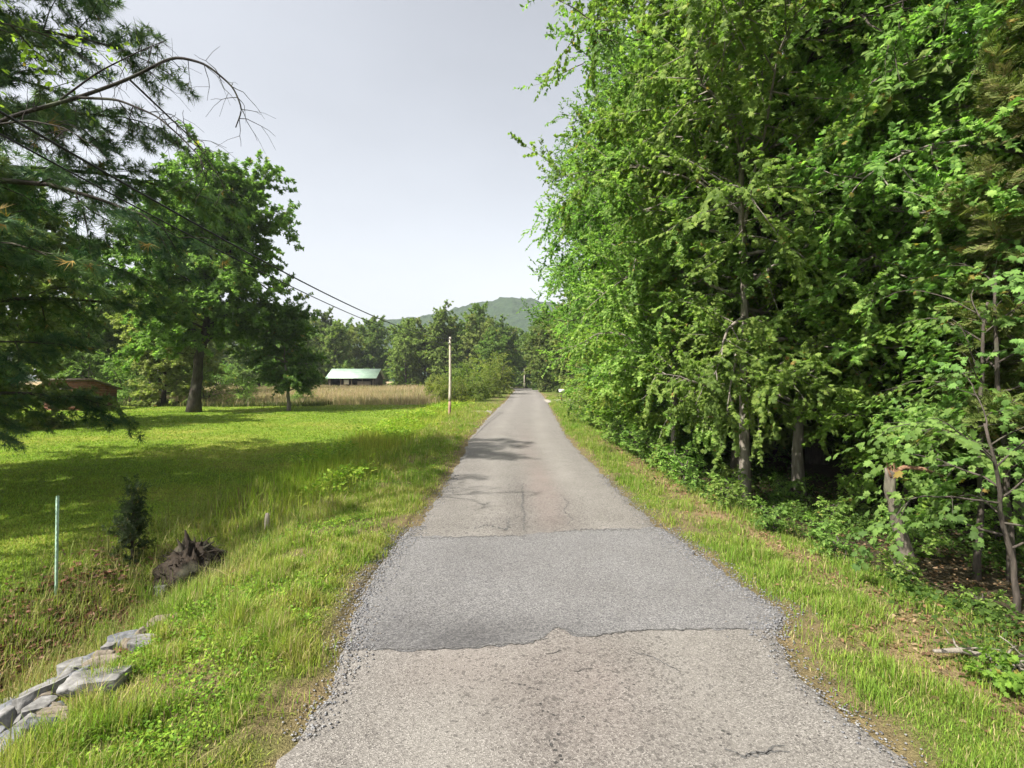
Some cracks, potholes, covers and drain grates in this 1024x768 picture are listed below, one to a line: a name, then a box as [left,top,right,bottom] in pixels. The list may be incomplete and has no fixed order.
crack [474,485,526,531]
